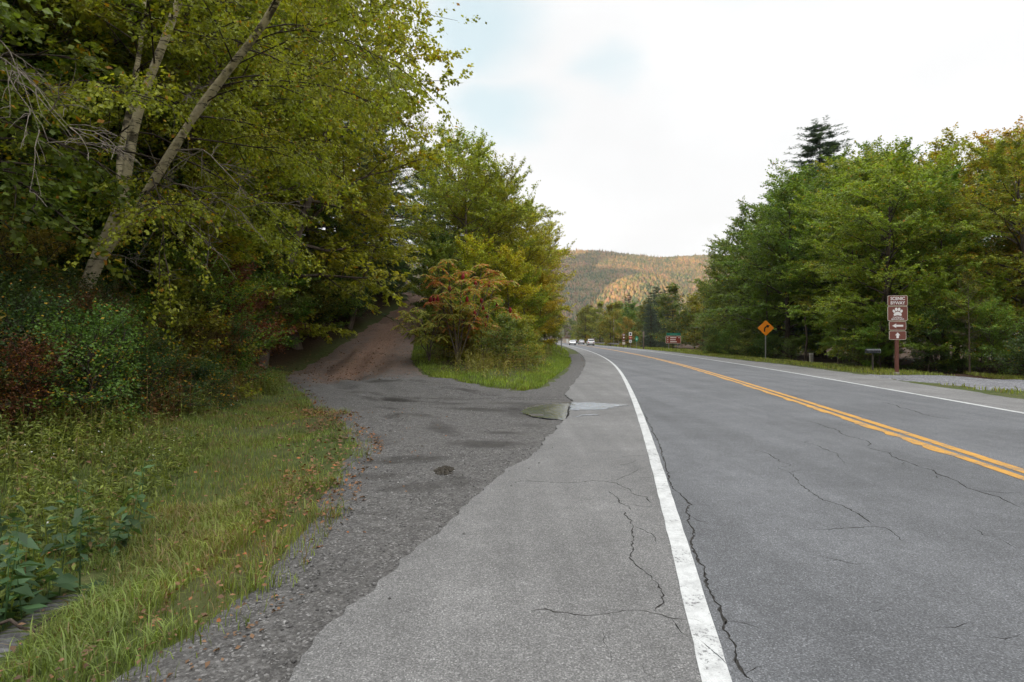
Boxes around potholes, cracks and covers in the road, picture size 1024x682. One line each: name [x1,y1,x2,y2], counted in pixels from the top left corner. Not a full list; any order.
crack [805,424,1019,507]
crack [533,414,764,682]
crack [764,452,913,544]
